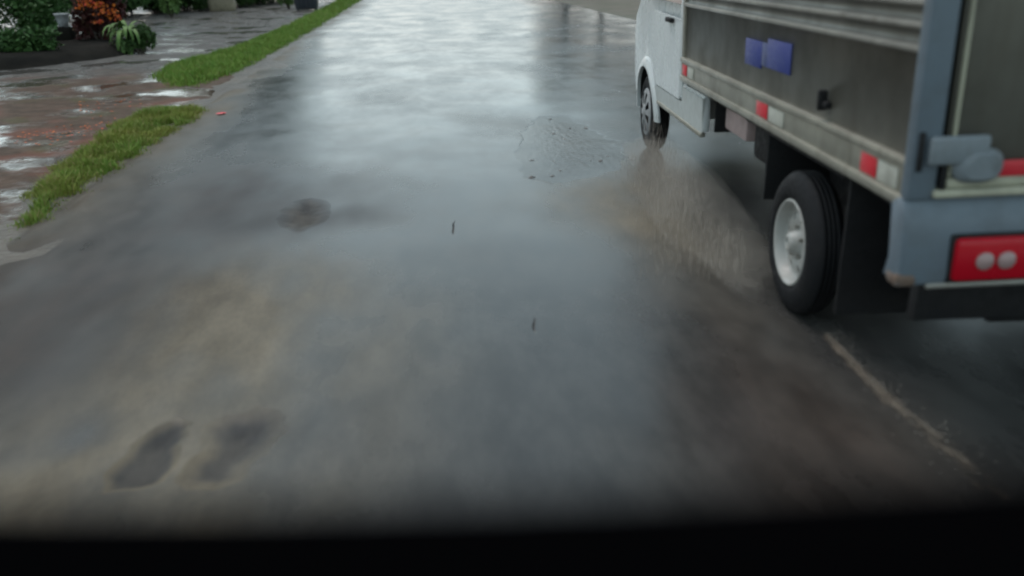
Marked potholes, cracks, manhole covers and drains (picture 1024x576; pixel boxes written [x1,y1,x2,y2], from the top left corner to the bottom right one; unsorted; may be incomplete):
pothole [274,198,332,233]
pothole [102,418,194,493]
pothole [174,407,291,490]
